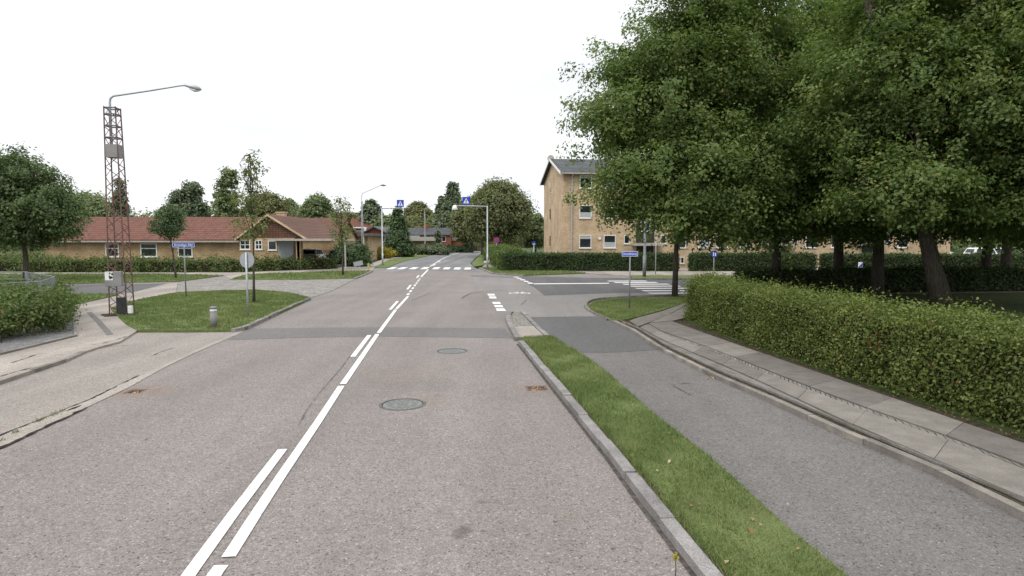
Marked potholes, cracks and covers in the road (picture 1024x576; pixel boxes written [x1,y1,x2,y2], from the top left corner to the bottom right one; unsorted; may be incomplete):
manhole cover [379,398,426,411]
